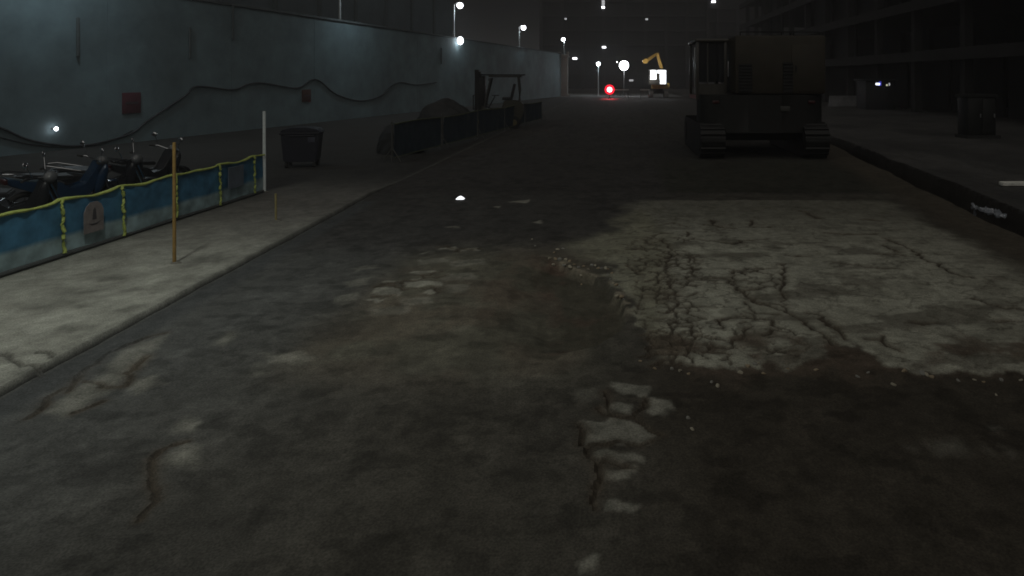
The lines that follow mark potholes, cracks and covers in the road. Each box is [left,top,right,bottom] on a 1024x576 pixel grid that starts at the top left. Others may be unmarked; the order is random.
crack [625,210,975,370]
crack [970,298,1024,323]
crack [134,440,192,523]
crack [0,332,168,420]
